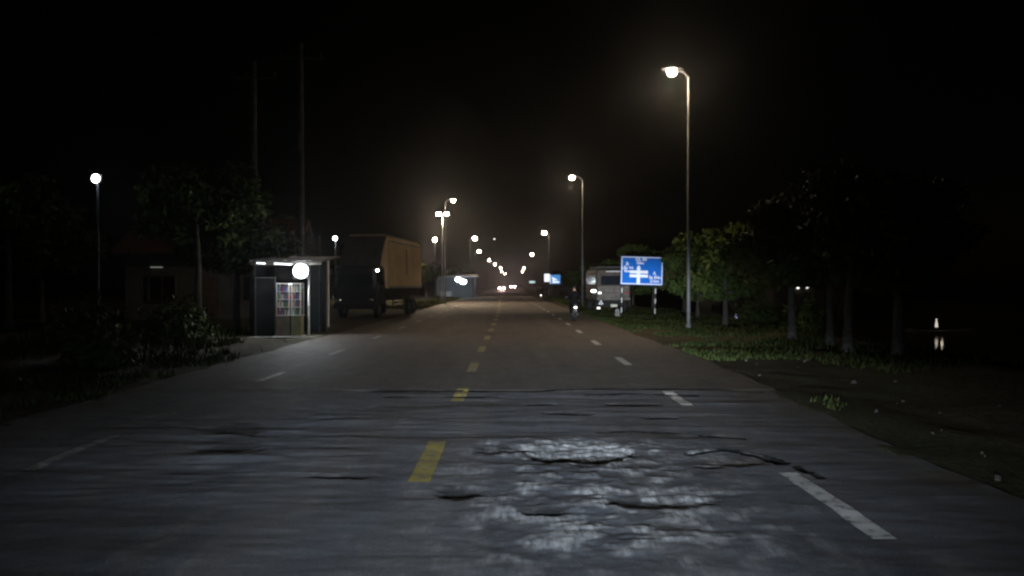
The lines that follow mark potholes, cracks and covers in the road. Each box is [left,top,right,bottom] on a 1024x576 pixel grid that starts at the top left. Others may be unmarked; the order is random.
pothole [517,504,571,516]
pothole [431,482,486,502]
pothole [585,494,729,510]
pothole [463,442,521,455]
pothole [512,438,652,468]
crack [595,431,827,479]
